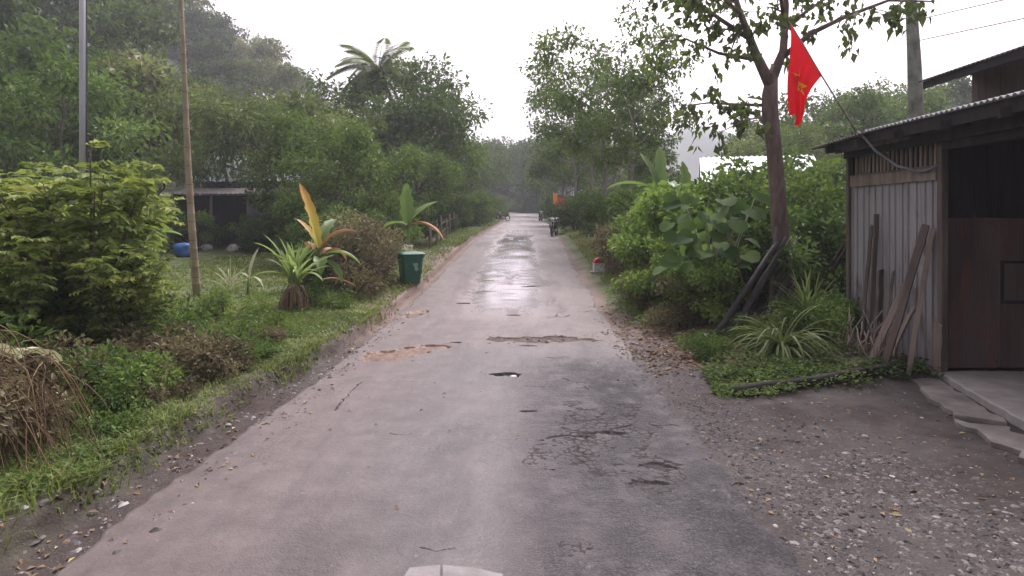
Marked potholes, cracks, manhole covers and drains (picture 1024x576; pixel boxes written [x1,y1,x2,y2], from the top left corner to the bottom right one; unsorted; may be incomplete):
pothole [468,370,541,380]
pothole [347,342,468,364]
crack [479,355,736,507]
crack [321,379,426,440]
pothole [487,406,555,416]
pothole [393,308,438,321]
pothole [471,335,614,344]
